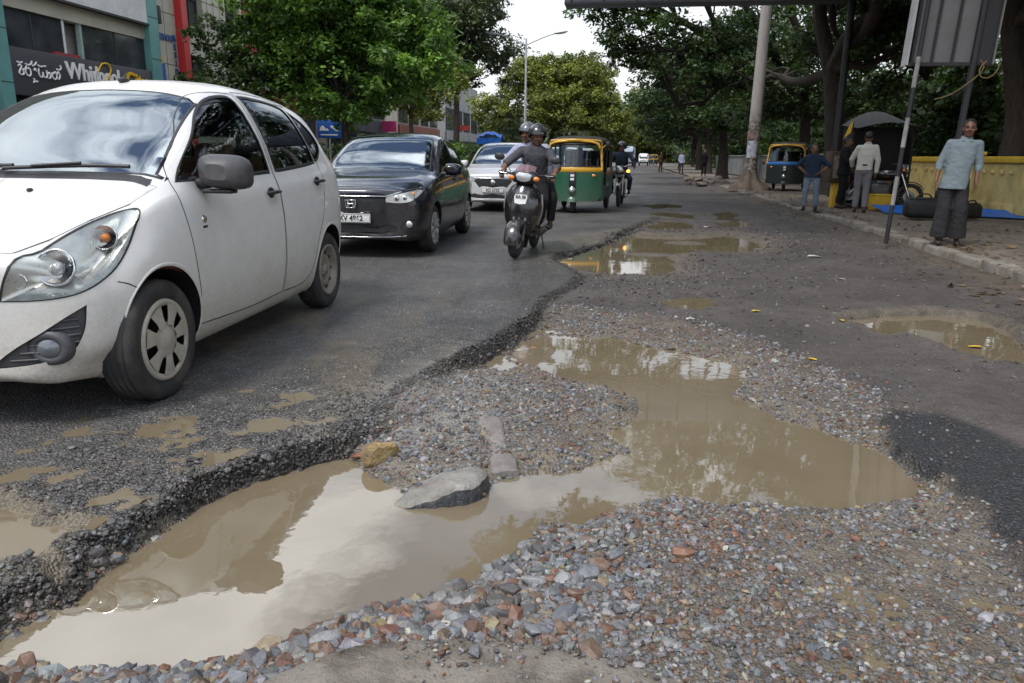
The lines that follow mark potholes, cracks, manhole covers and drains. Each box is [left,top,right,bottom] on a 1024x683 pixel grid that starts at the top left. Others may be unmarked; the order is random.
pothole [0,304,1024,683]
pothole [533,229,781,278]
